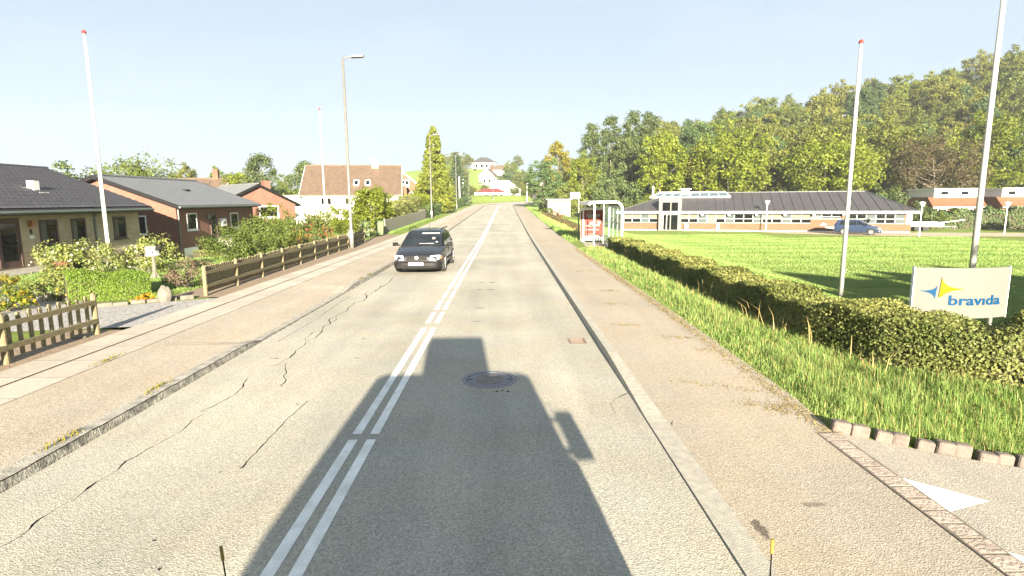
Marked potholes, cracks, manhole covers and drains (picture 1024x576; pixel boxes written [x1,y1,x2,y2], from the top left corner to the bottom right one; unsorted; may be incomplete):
manhole cover [462,371,517,388]
crack [1,378,249,547]
crack [239,279,392,469]
